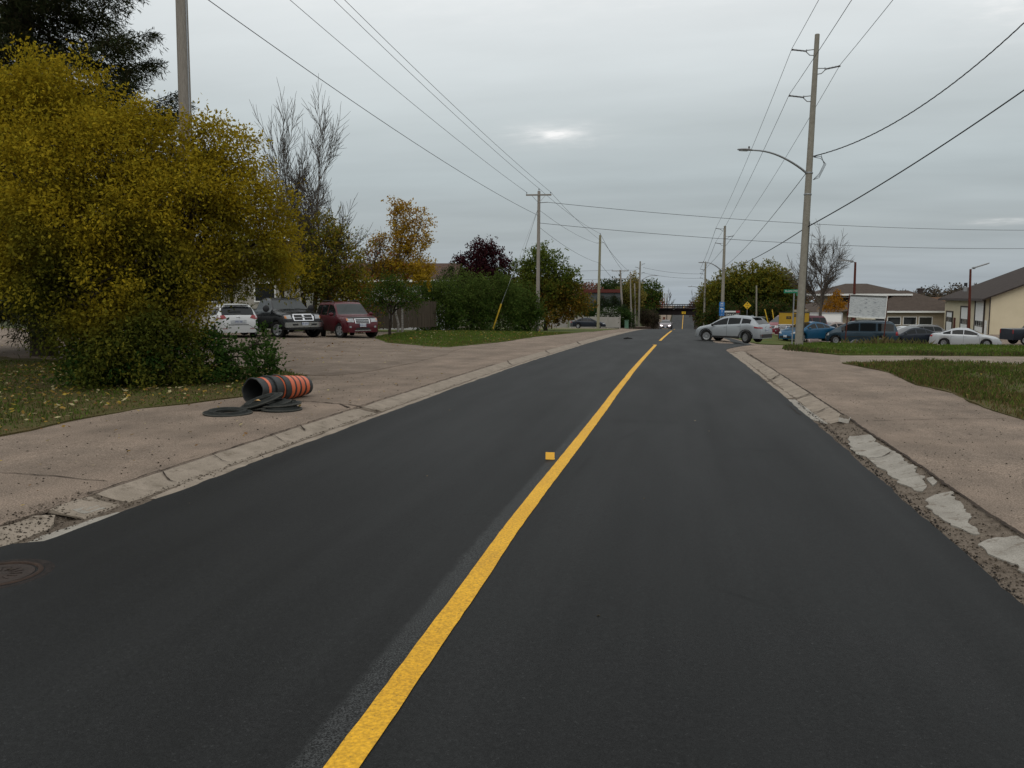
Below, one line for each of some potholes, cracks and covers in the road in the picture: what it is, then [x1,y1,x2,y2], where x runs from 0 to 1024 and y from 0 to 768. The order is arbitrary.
manhole cover [0,559,55,589]
